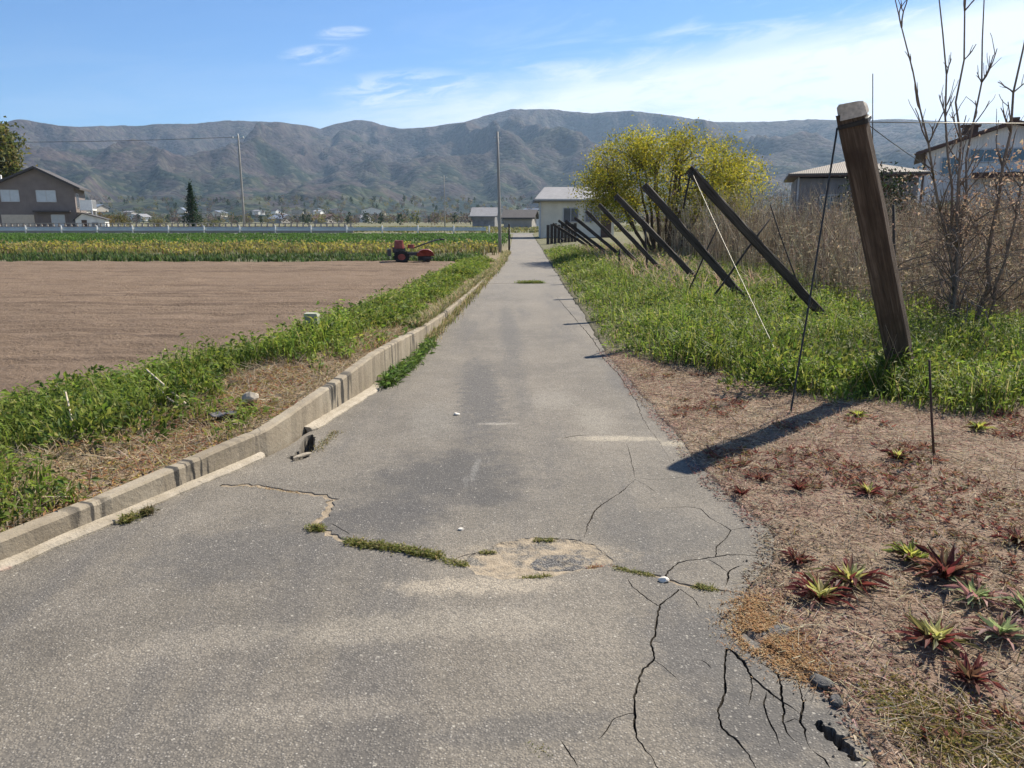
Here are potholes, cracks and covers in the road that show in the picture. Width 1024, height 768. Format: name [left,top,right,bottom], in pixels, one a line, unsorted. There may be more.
pothole [288,434,316,461]
pothole [814,720,861,762]
crack [584,443,689,538]
crack [701,648,830,768]
crack [597,507,774,768]
